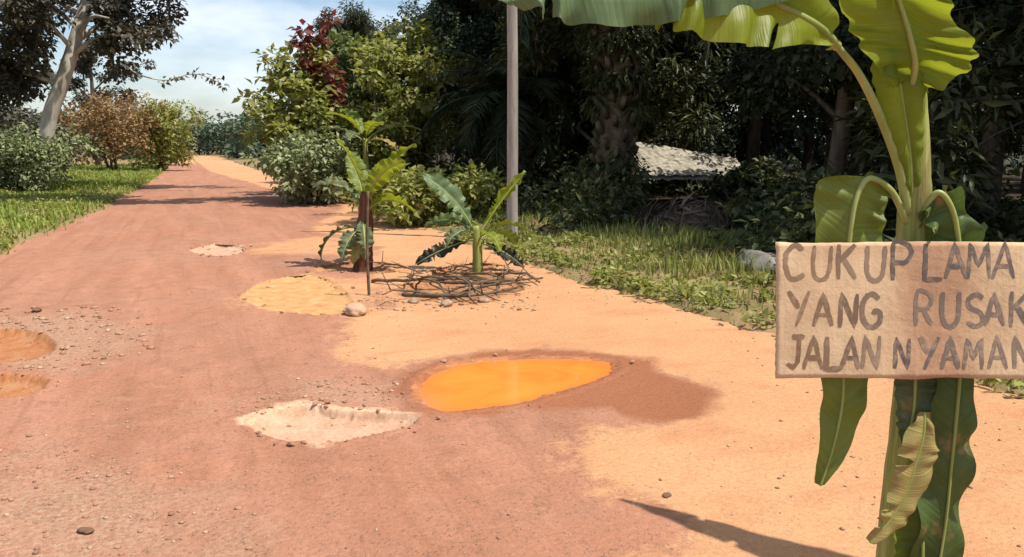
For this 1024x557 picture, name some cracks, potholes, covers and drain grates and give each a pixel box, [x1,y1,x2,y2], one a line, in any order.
pothole [397,353,635,416]
pothole [187,243,252,257]
pothole [235,398,441,448]
pothole [0,327,68,364]
pothole [0,368,62,401]
